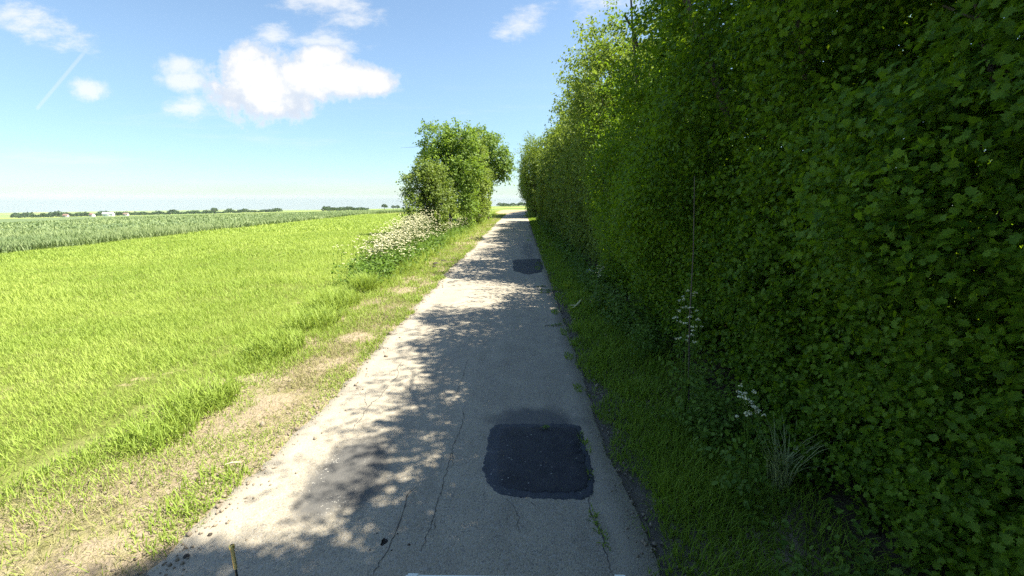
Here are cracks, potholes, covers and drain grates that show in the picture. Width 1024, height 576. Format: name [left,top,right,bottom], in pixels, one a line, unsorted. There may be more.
crack [373,489,414,574]
crack [422,409,464,546]
